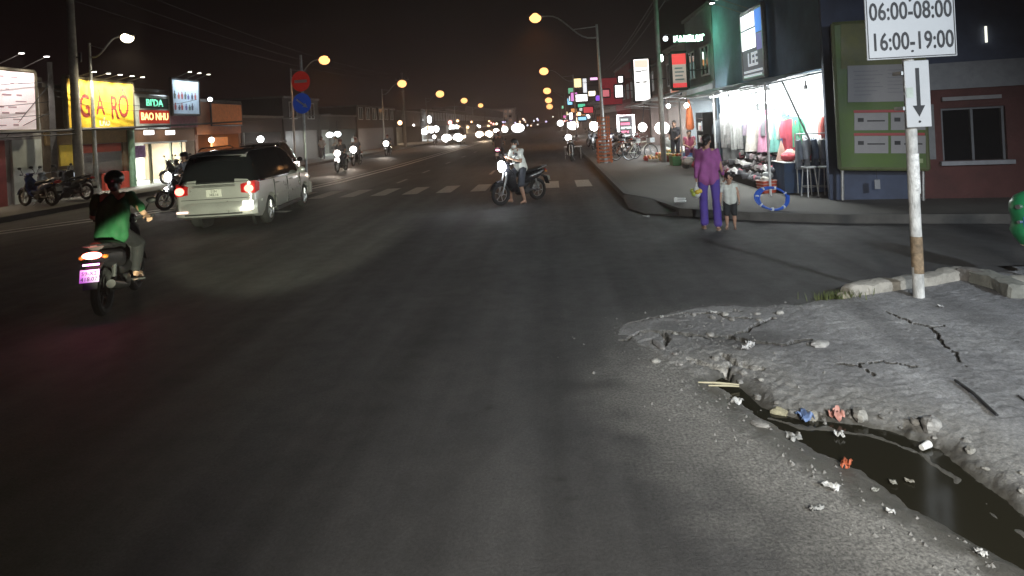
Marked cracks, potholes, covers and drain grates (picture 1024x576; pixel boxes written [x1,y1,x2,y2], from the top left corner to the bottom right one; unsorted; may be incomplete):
crack [835,311,967,376]
pothole [701,375,1024,576]
crack [620,310,813,382]
